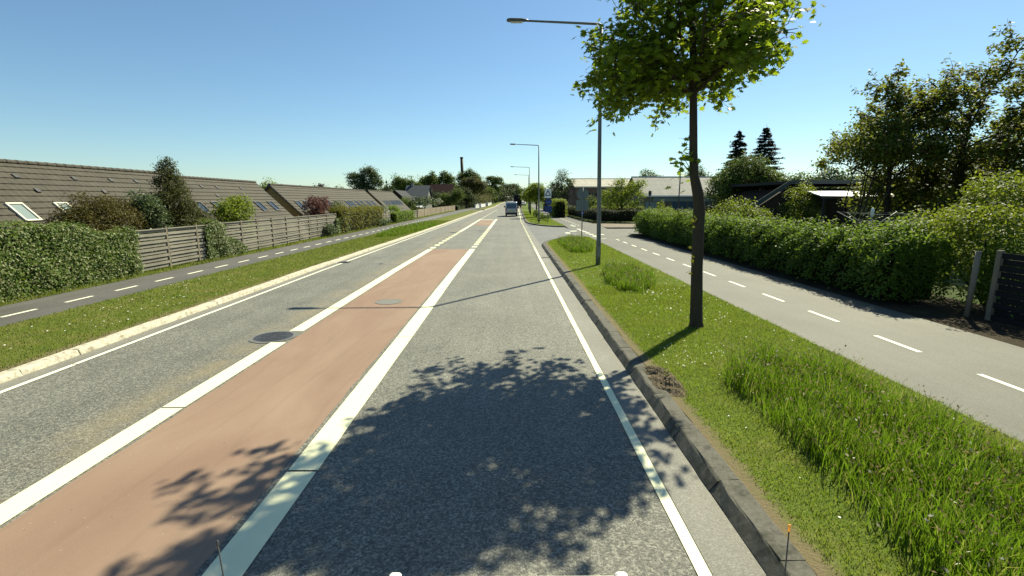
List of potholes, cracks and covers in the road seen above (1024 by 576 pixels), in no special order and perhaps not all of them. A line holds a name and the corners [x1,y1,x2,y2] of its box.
manhole cover [249,331,299,343]
